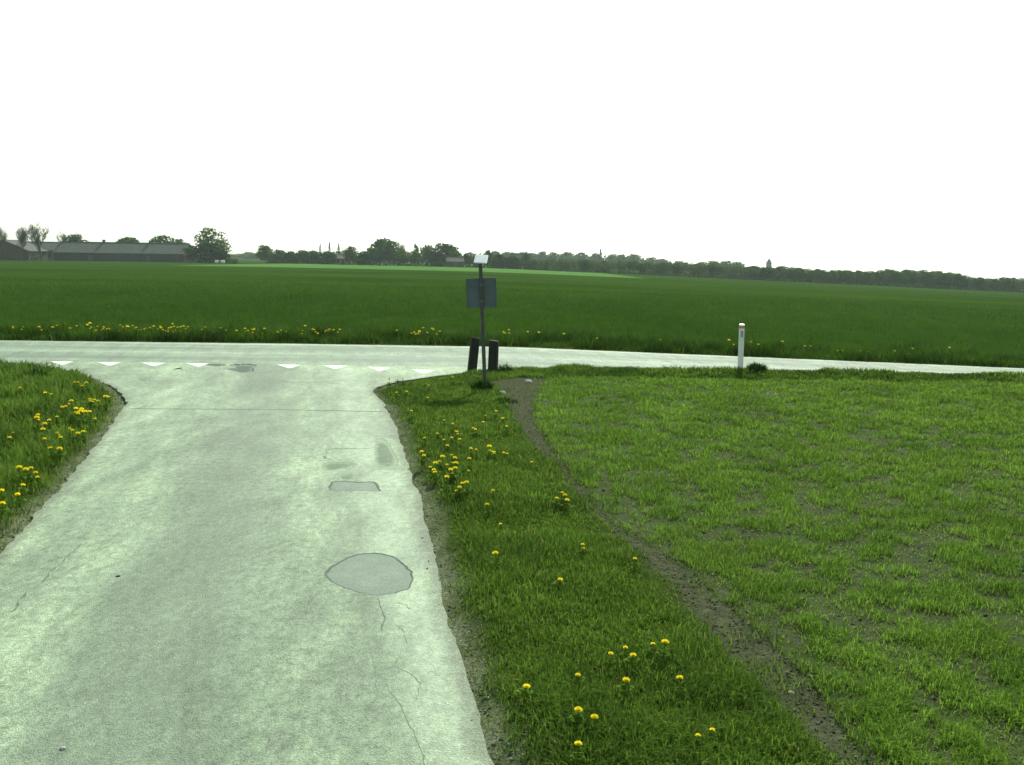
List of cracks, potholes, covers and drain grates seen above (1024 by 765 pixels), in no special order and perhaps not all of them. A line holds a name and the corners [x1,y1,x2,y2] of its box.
crack [372,599,425,765]
